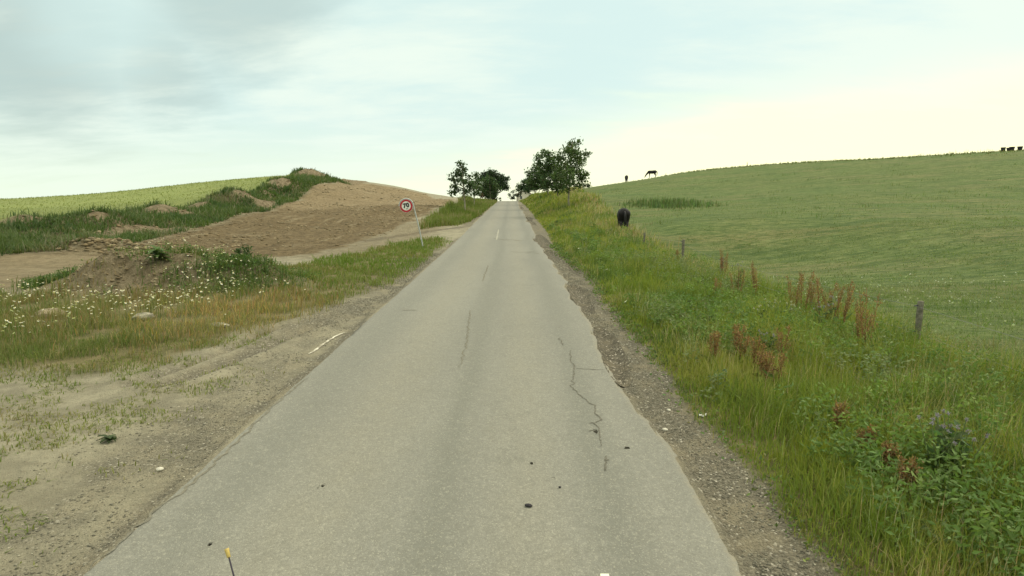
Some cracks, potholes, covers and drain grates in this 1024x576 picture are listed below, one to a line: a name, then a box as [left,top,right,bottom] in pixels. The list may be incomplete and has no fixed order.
crack [558,338,609,471]
crack [458,310,471,367]
